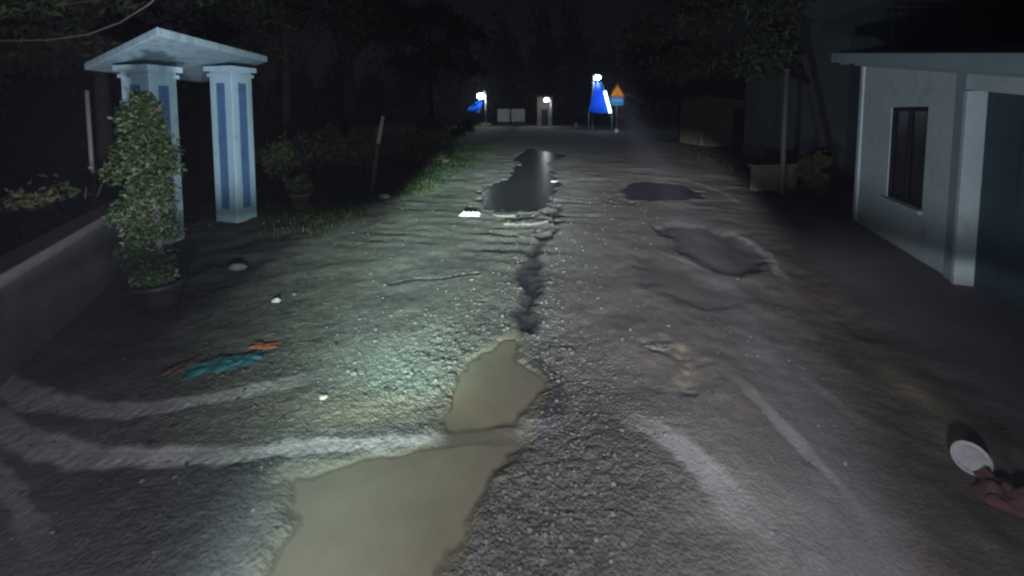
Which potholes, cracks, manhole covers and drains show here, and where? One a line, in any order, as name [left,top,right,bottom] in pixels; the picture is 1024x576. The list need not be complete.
pothole [633,331,716,401]
pothole [472,147,571,213]
pothole [615,181,709,201]
crack [487,230,537,238]
pothole [236,327,557,576]
crack [385,272,481,287]
pothole [648,220,781,280]
